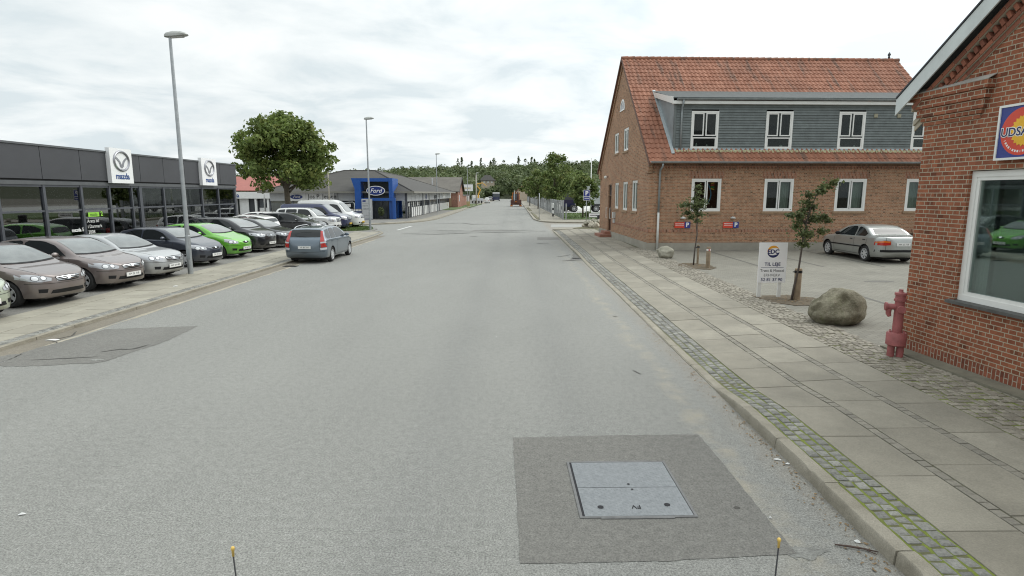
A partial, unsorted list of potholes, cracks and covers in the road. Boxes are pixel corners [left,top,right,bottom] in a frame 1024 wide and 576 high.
crack [37,331,146,360]
manhole cover [566,460,698,519]
